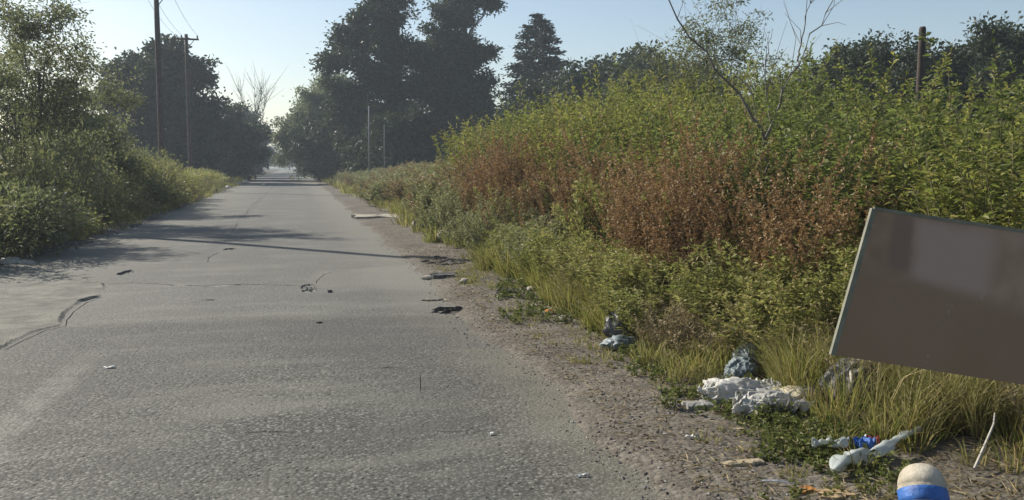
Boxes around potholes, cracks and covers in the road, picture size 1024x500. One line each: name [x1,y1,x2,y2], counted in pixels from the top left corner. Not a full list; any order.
crack [7,298,99,349]
crack [119,283,296,301]
